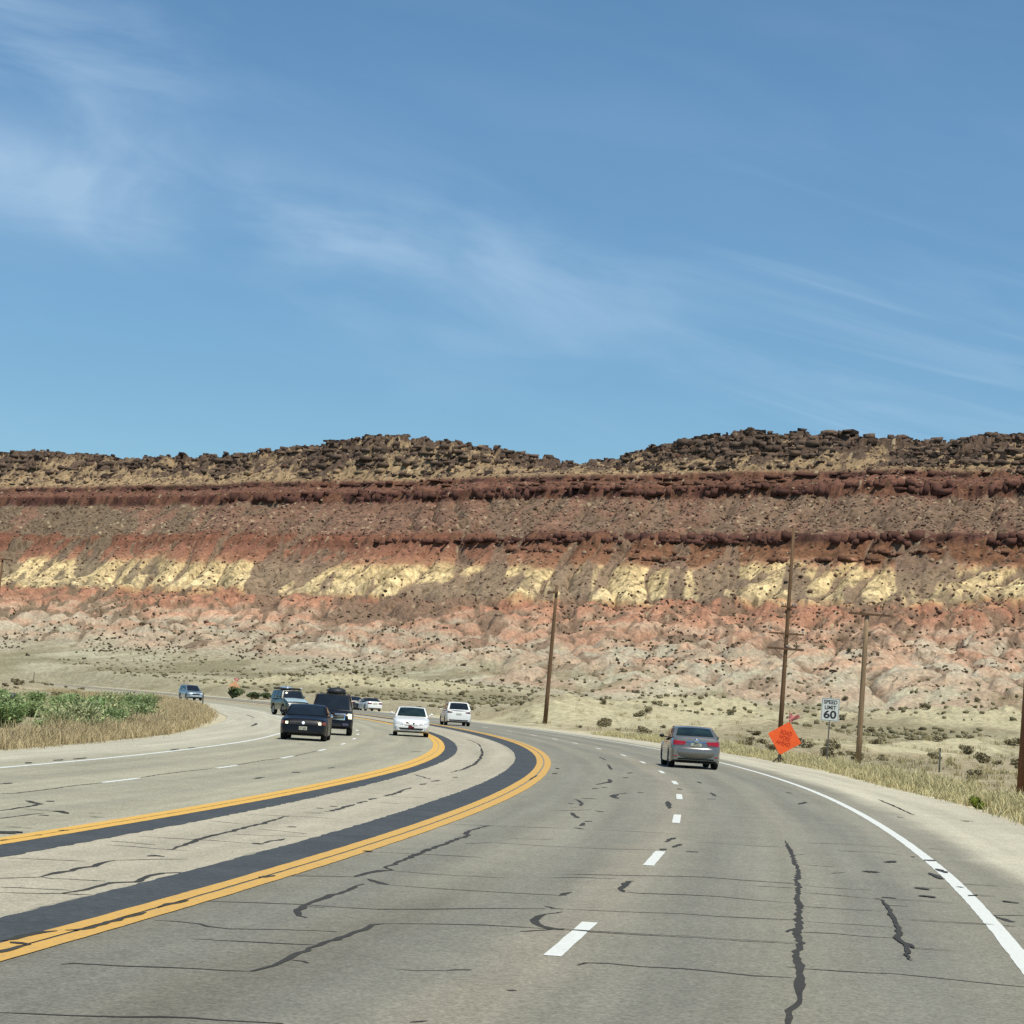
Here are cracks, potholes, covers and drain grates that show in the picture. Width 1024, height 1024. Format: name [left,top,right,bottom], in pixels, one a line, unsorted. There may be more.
crack [216,842,1024,943]
crack [160,920,337,963]
crack [116,814,334,860]
